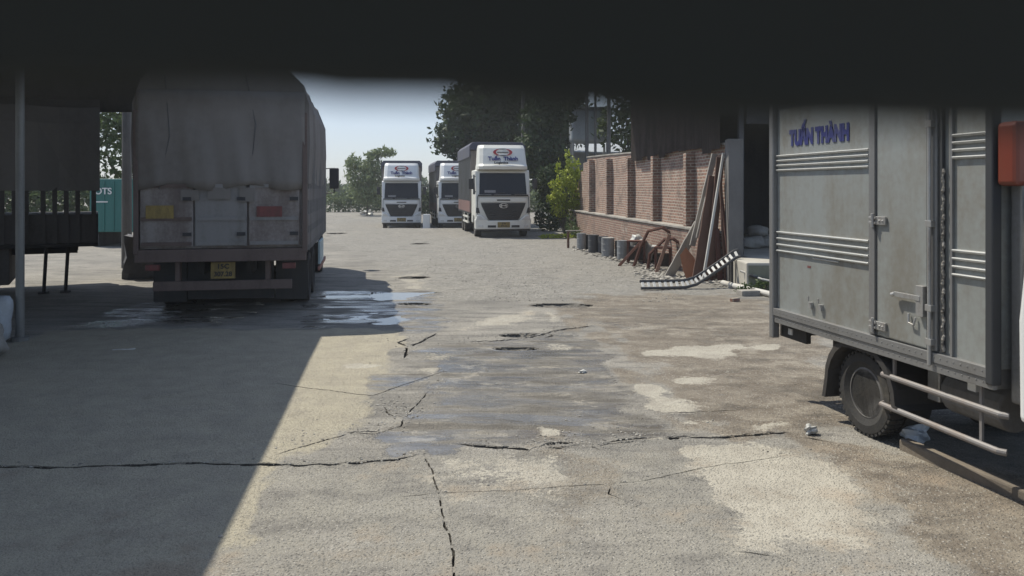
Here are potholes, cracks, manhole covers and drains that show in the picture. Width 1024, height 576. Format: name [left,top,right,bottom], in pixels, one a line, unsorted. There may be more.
crack [0,333,842,508]
crack [463,325,598,343]
